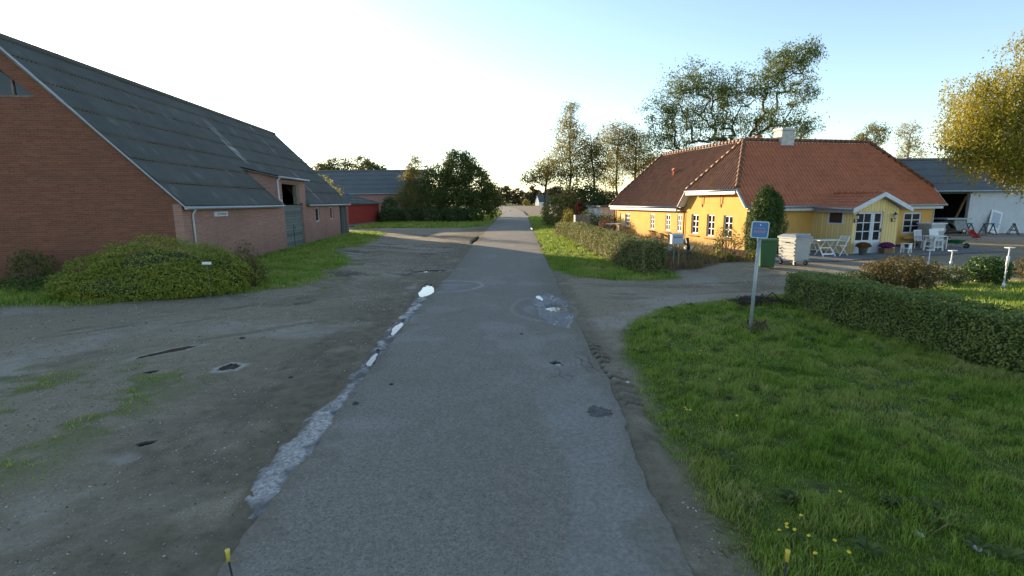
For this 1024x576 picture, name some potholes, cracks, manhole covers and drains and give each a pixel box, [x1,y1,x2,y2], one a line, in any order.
pothole [528,292,579,329]
pothole [132,344,205,361]
pothole [212,362,247,372]
